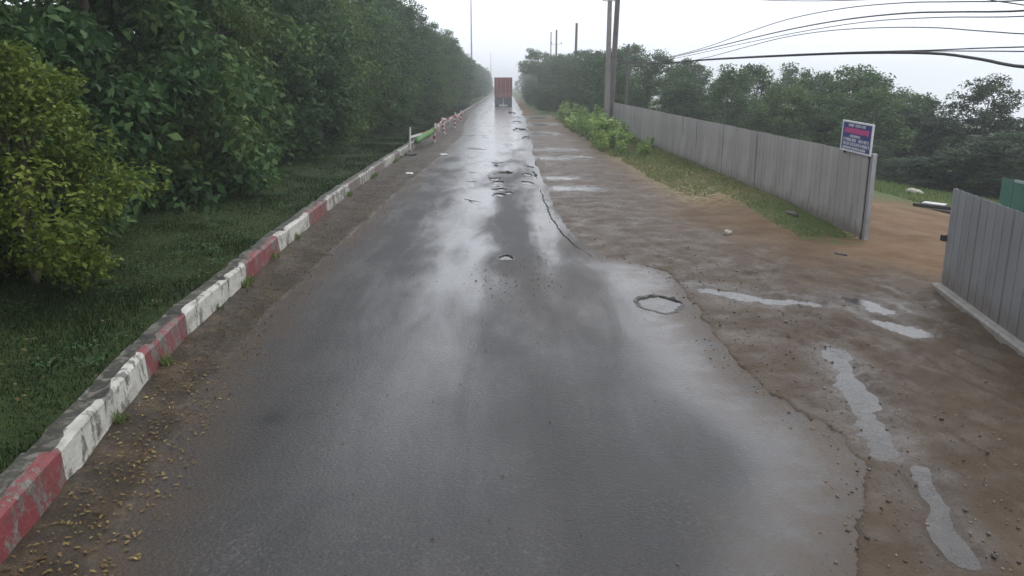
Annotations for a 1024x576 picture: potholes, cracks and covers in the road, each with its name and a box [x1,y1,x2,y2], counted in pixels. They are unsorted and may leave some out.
pothole [634,293,686,315]
crack [463,135,591,256]
